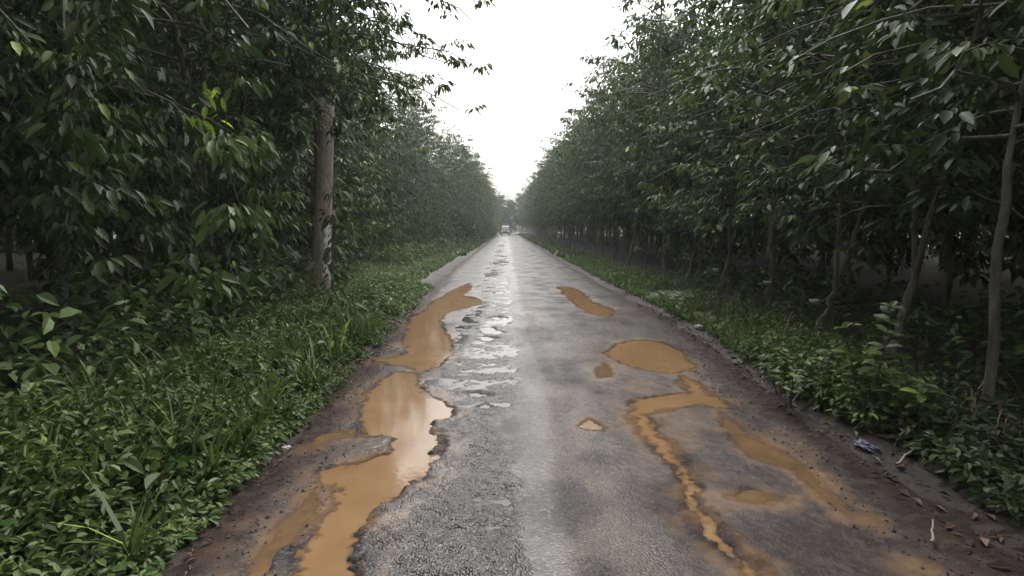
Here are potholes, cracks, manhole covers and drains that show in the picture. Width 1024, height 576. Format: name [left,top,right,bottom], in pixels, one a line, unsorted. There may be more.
pothole [578,418,606,431]
pothole [557,286,615,317]
pothole [594,362,613,379]
pothole [373,283,483,372]
pothole [287,371,458,576]
pothole [603,339,698,374]
